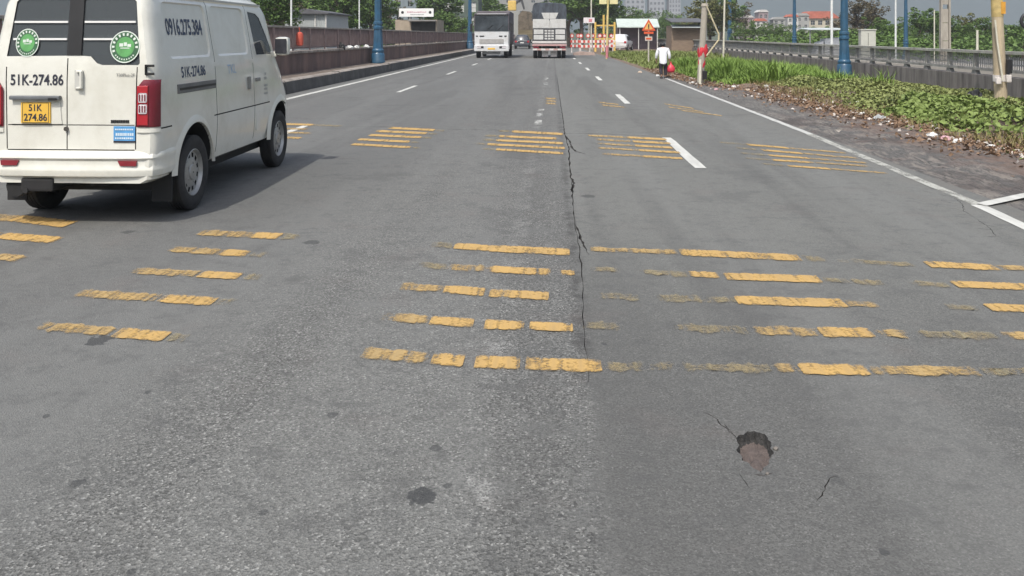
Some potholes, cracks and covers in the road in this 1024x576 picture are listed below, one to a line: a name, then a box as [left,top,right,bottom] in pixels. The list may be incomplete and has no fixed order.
crack [365,79,657,372]
pothole [736,431,774,472]
